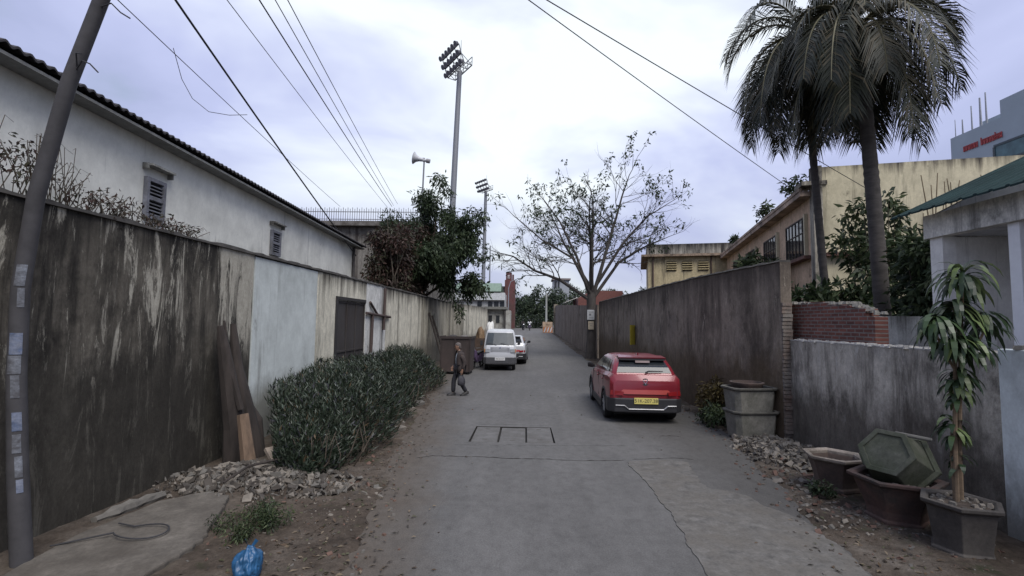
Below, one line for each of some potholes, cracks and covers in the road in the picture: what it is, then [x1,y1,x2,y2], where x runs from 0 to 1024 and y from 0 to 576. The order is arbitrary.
manhole cover [471,427,500,442]
manhole cover [527,428,553,443]
manhole cover [499,428,525,443]
